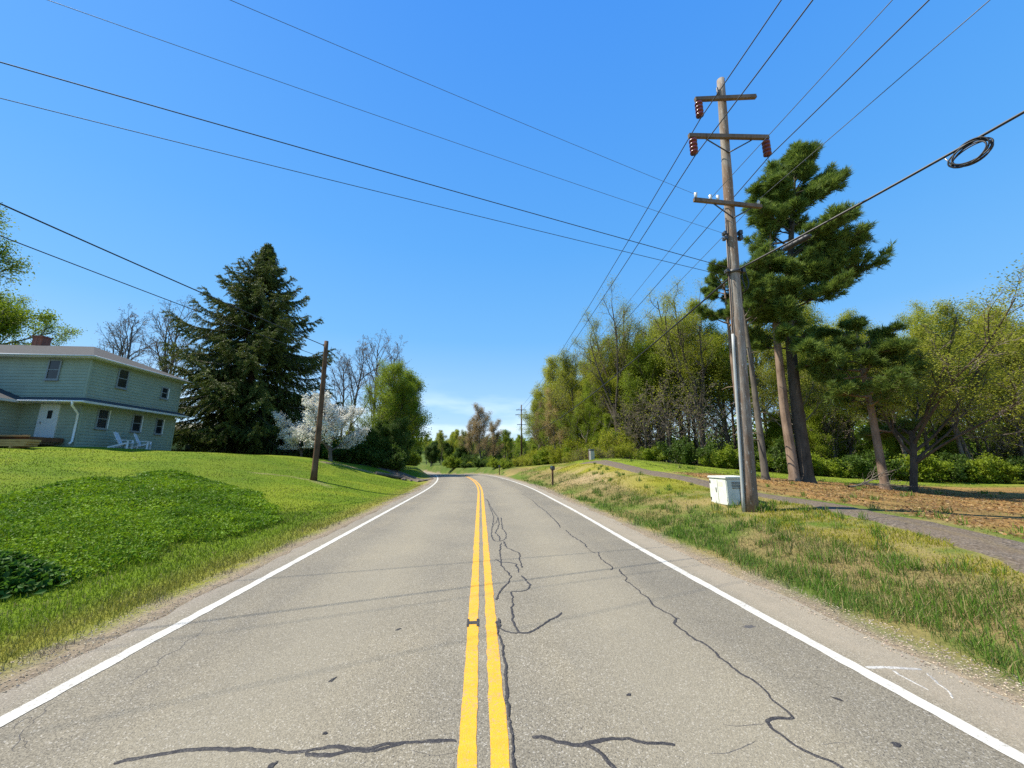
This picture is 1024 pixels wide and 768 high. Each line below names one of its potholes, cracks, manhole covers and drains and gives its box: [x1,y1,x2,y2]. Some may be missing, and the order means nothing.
crack [710,723,764,754]
crack [11,703,53,752]
crack [132,626,206,681]
